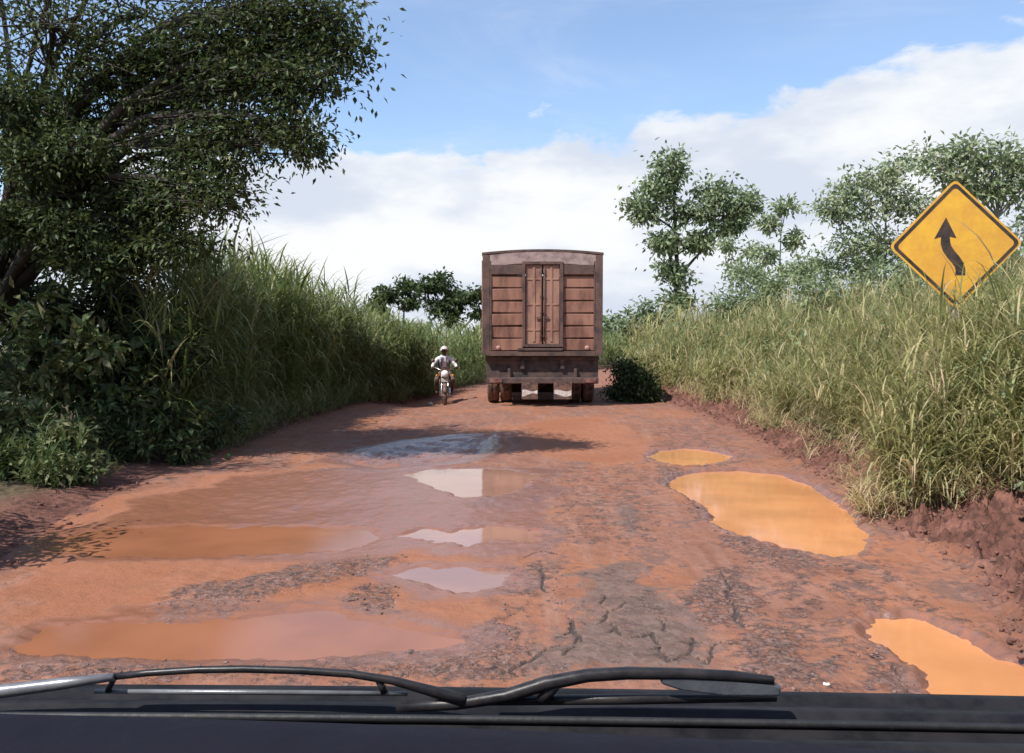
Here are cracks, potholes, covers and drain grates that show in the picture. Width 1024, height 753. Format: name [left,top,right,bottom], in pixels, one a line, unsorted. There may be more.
pothole [333,435,502,470]
pothole [389,524,553,549]
pothole [376,563,524,595]
pothole [663,466,877,558]
pothole [850,607,1024,696]
pothole [644,445,738,466]
pothole [397,467,542,498]
pothole [0,603,482,664]
pothole [43,522,394,559]
crack [524,551,559,592]
crack [508,570,749,673]
